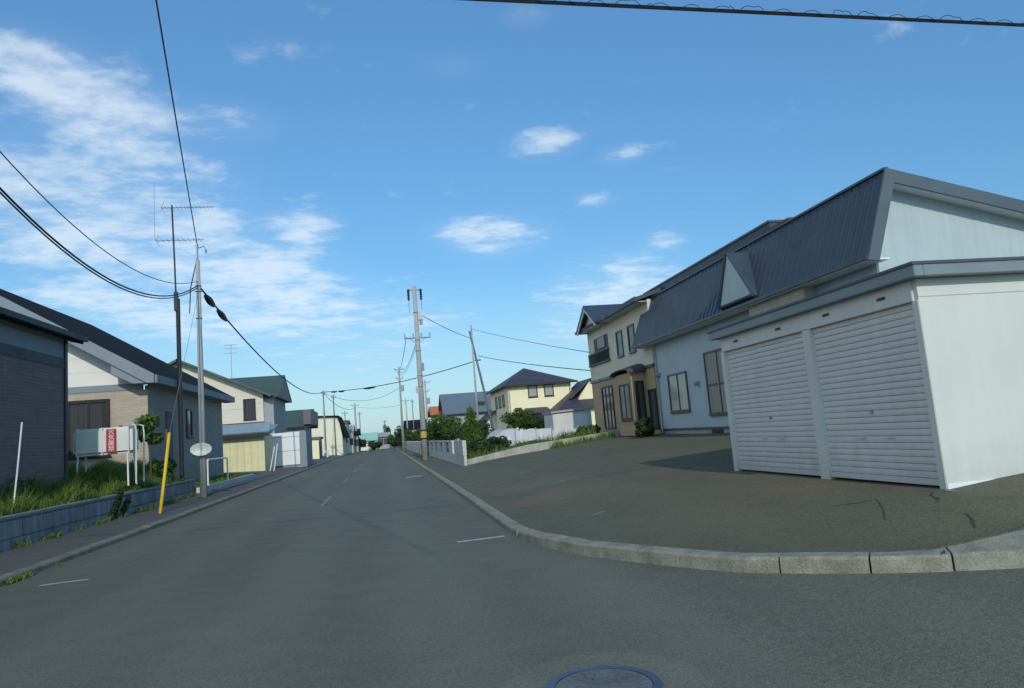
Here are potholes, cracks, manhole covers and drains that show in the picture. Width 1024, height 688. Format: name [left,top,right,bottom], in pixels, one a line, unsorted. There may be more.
manhole cover [546,665,663,688]
